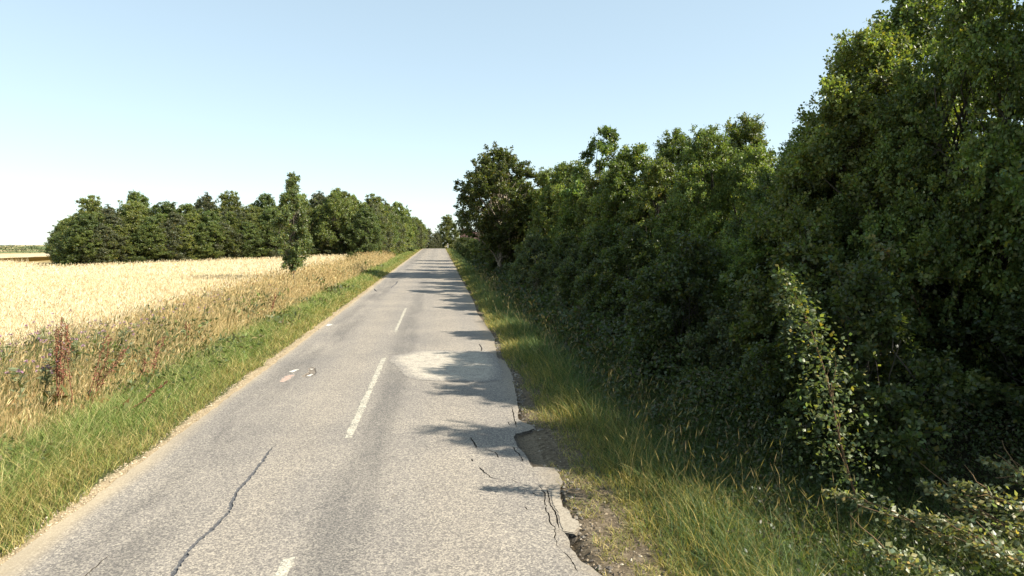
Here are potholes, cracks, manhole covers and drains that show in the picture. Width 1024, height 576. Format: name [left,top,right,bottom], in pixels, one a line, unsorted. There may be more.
crack [470,437,577,570]
crack [171,447,272,576]
